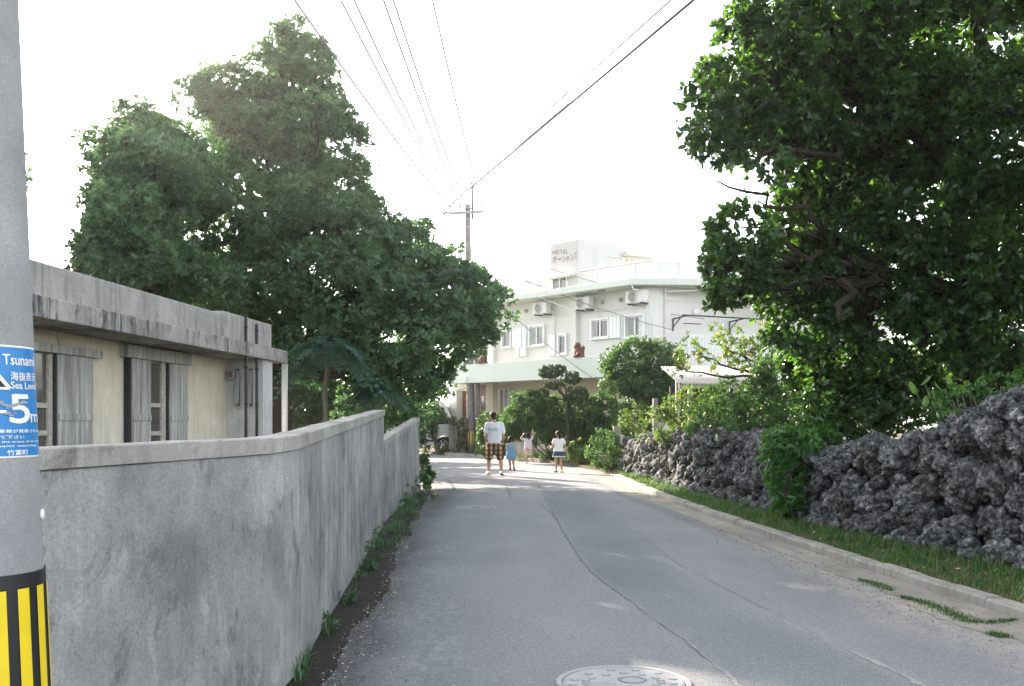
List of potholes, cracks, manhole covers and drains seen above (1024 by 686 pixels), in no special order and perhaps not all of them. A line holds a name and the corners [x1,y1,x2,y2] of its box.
manhole cover [556,665,692,686]
crack [536,480,743,686]
